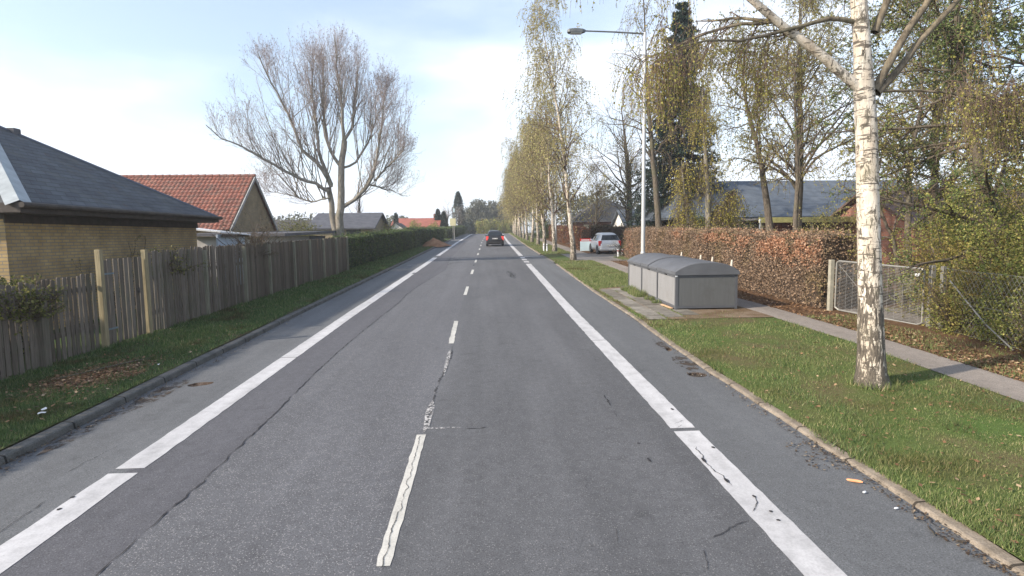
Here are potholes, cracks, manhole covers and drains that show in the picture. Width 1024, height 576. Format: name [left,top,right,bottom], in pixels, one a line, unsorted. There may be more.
crack [704,498,758,569]
